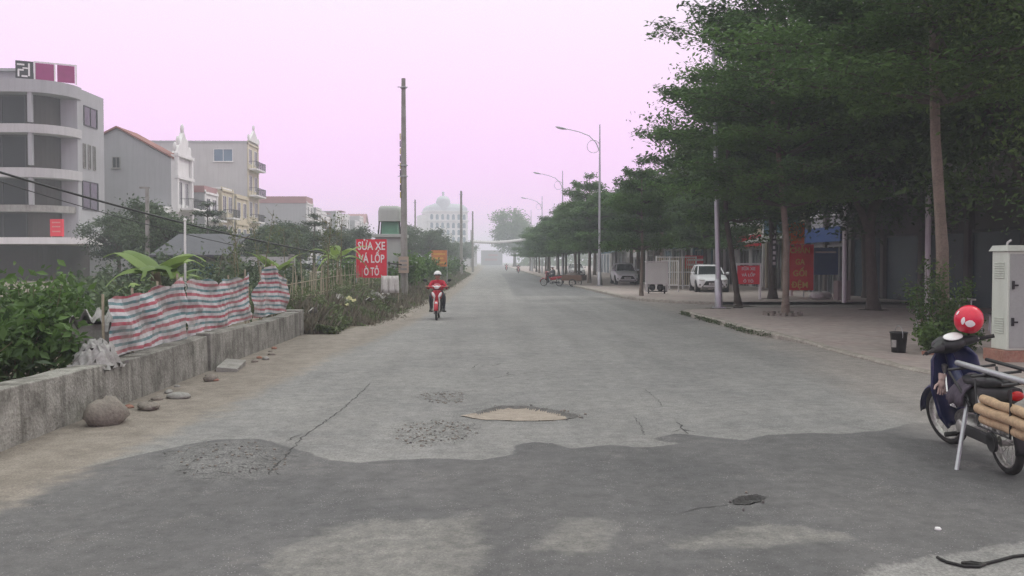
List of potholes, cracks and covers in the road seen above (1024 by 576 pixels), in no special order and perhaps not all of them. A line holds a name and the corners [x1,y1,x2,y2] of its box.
pothole [461,404,587,421]
pothole [729,491,766,511]
